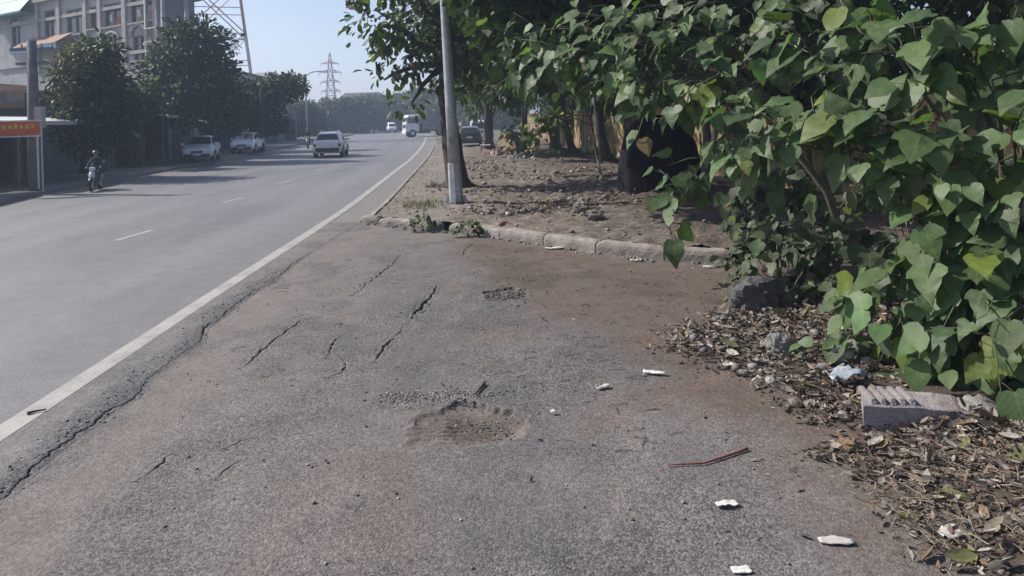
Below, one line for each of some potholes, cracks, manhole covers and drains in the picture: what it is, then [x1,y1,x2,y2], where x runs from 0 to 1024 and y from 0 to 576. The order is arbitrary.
pothole [388,393,548,457]
pothole [478,286,538,303]
crack [0,254,442,505]
